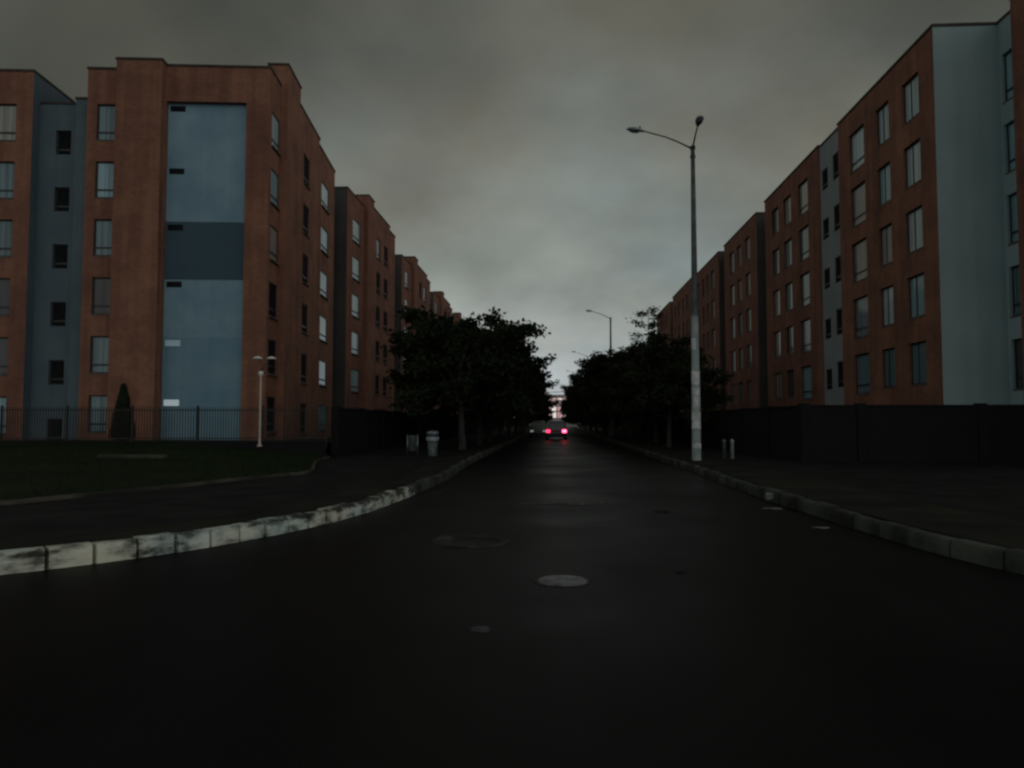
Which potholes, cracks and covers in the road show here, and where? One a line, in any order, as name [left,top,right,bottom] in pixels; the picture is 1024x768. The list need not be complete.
manhole cover [430,534,512,548]
manhole cover [533,575,593,588]
